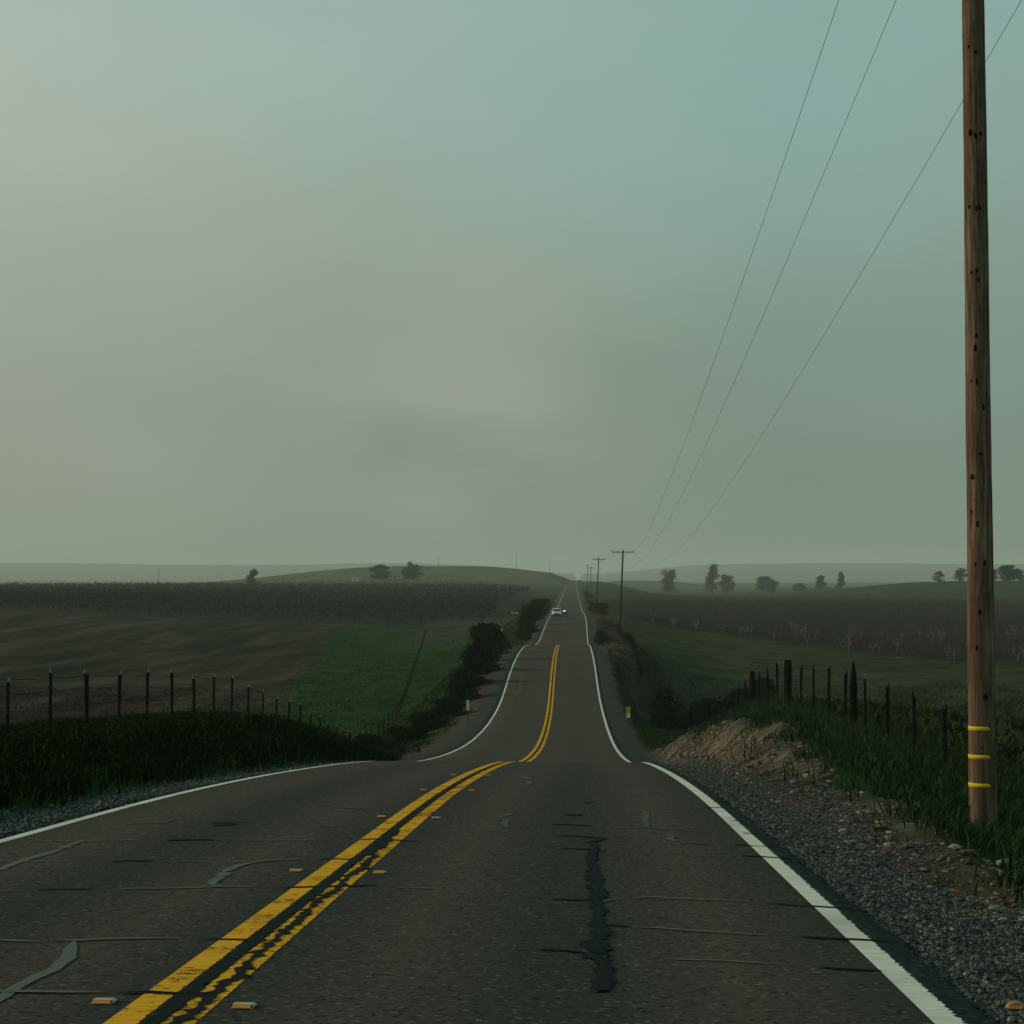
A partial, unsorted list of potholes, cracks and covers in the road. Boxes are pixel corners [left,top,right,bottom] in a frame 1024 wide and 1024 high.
crack [0,819,429,891]
crack [620,809,710,856]
